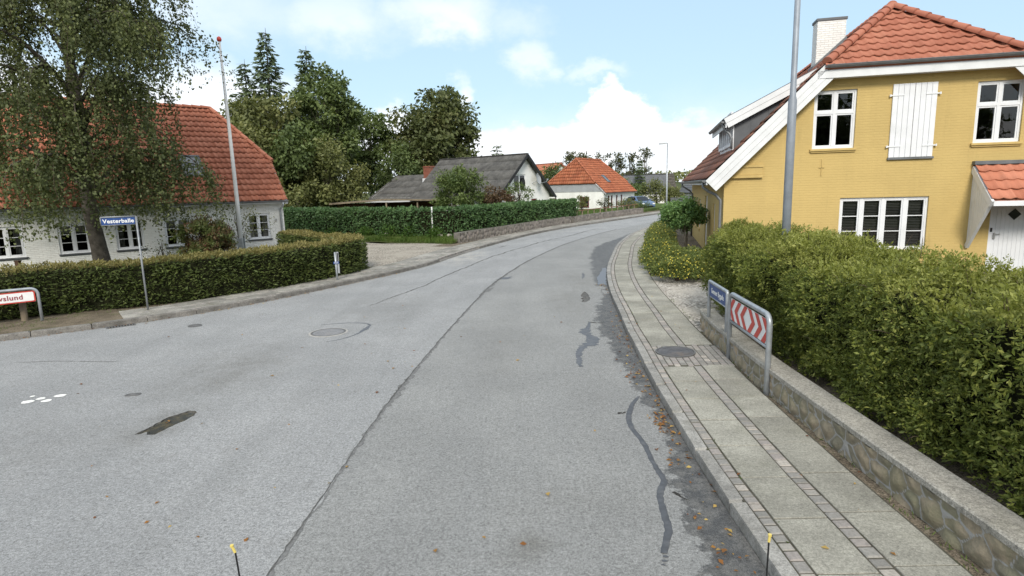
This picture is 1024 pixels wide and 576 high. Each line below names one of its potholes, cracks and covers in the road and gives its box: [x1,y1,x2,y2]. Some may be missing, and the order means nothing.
manhole cover [309,328,348,337]
manhole cover [655,346,696,358]
